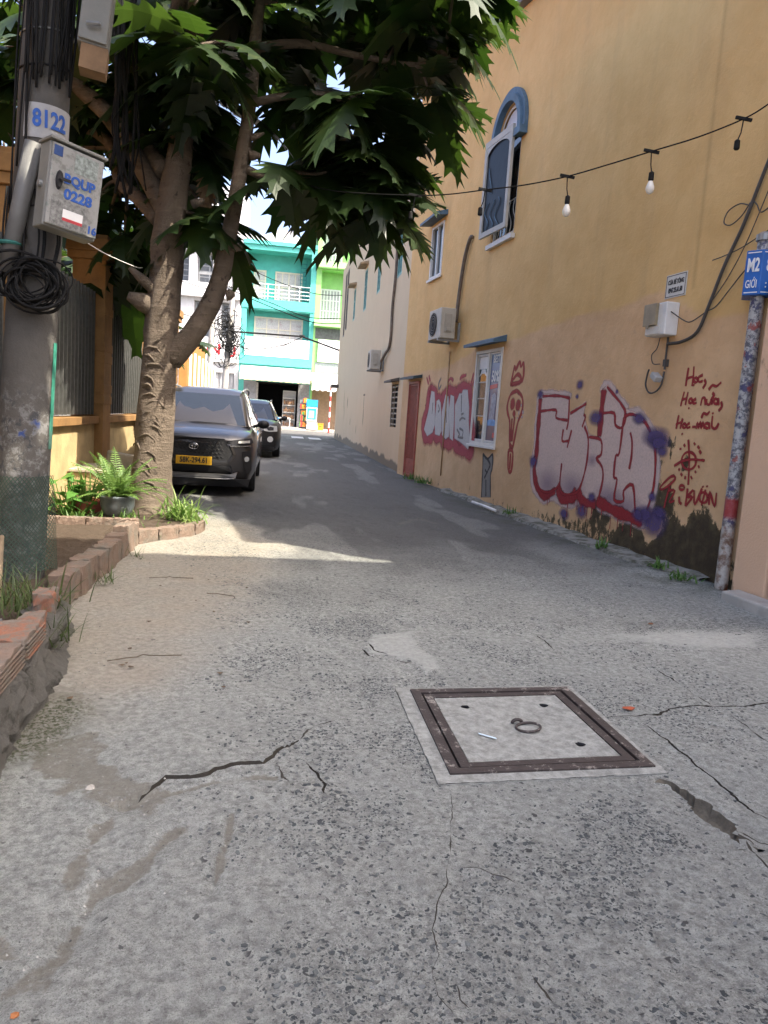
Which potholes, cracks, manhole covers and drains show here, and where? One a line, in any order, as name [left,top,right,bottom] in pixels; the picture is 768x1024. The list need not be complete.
crack [427,787,519,1024]
crack [129,720,336,809]
crack [635,720,768,823]
manhole cover [395,685,668,786]
